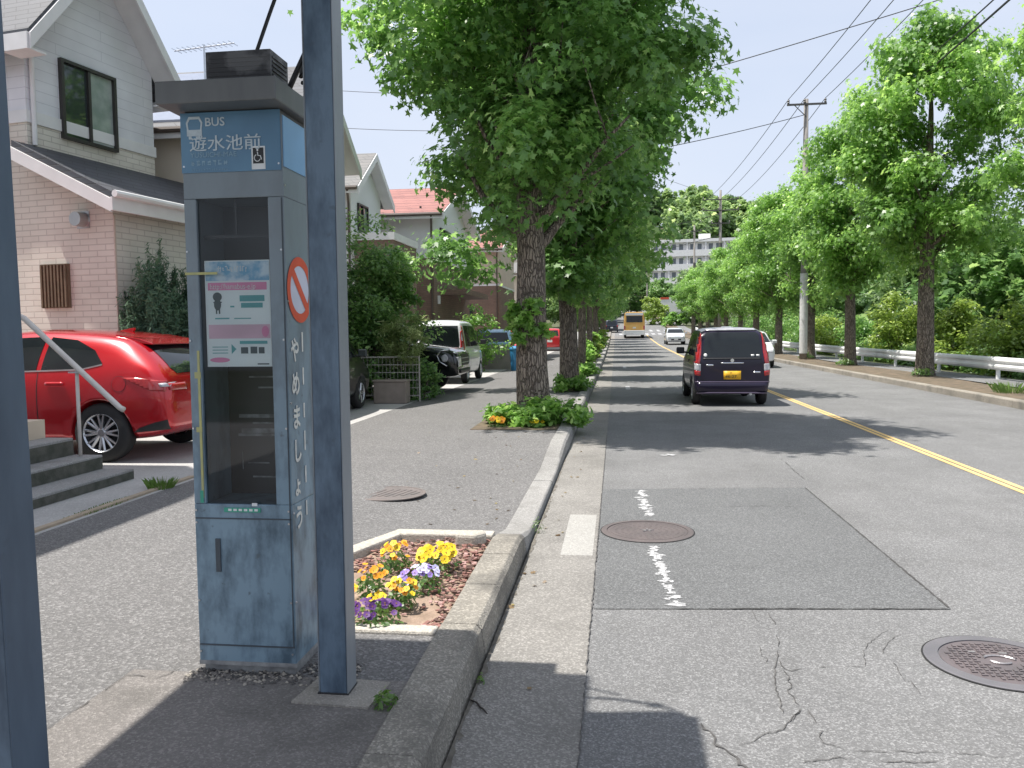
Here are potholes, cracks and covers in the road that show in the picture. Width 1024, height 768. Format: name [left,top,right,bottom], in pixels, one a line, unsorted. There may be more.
crack [701,607,994,768]
manhole cover [600,520,695,543]
manhole cover [365,486,426,501]
manhole cover [921,635,1024,692]
